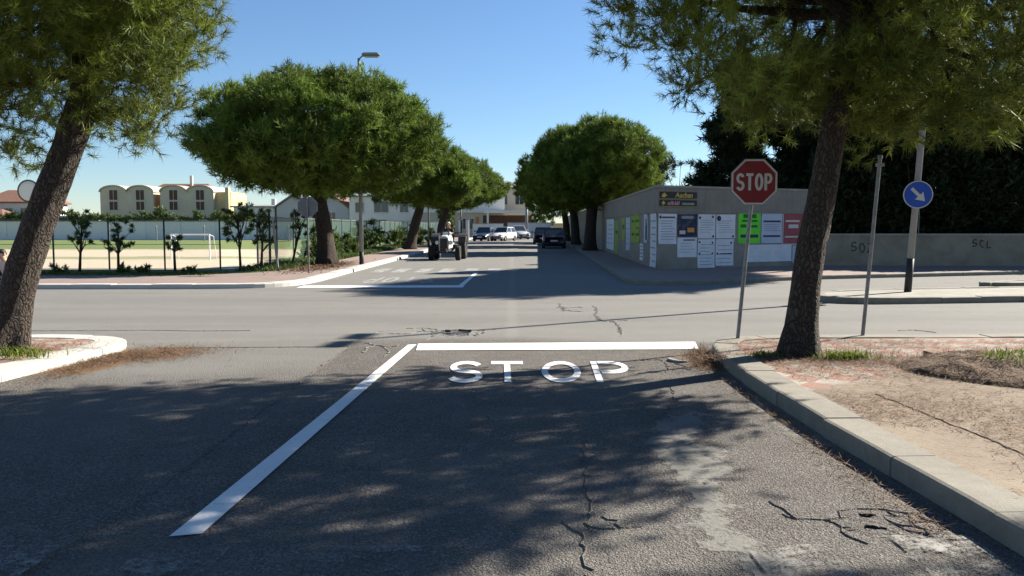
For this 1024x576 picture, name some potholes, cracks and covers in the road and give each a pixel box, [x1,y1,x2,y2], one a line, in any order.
crack [768,501,960,552]
crack [638,359,698,420]
crack [560,441,642,576]
pothole [434,329,478,337]
crack [556,304,629,337]
